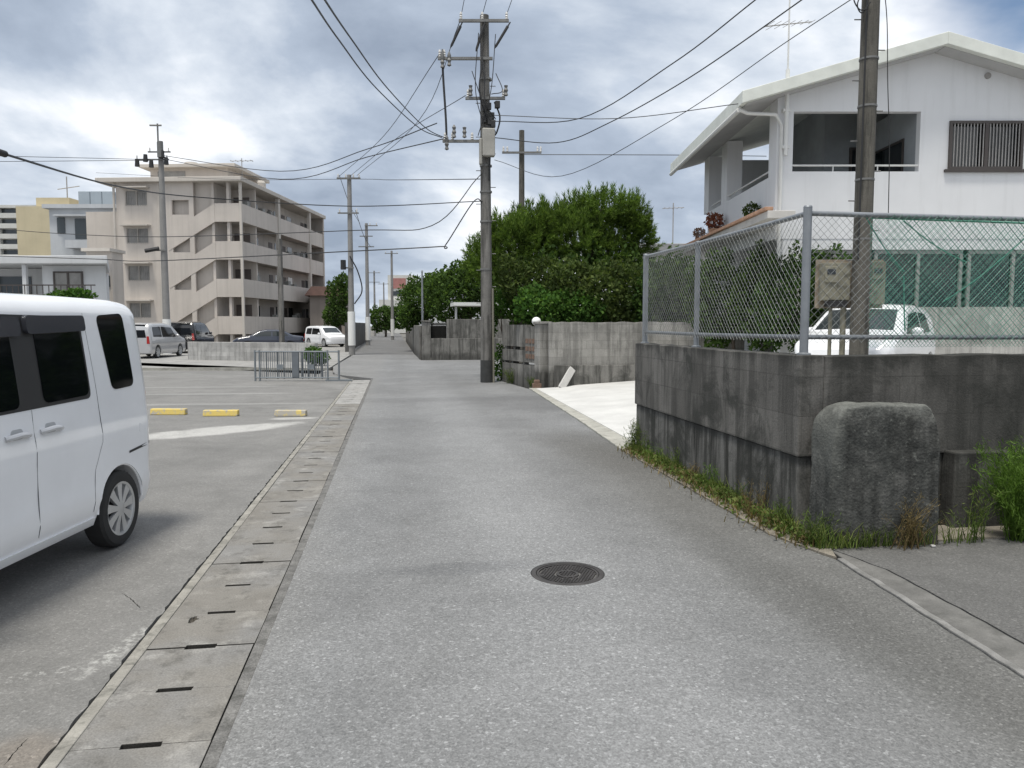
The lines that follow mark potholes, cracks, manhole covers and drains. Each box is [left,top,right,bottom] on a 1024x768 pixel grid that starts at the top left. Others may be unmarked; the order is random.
manhole cover [531,562,604,586]
